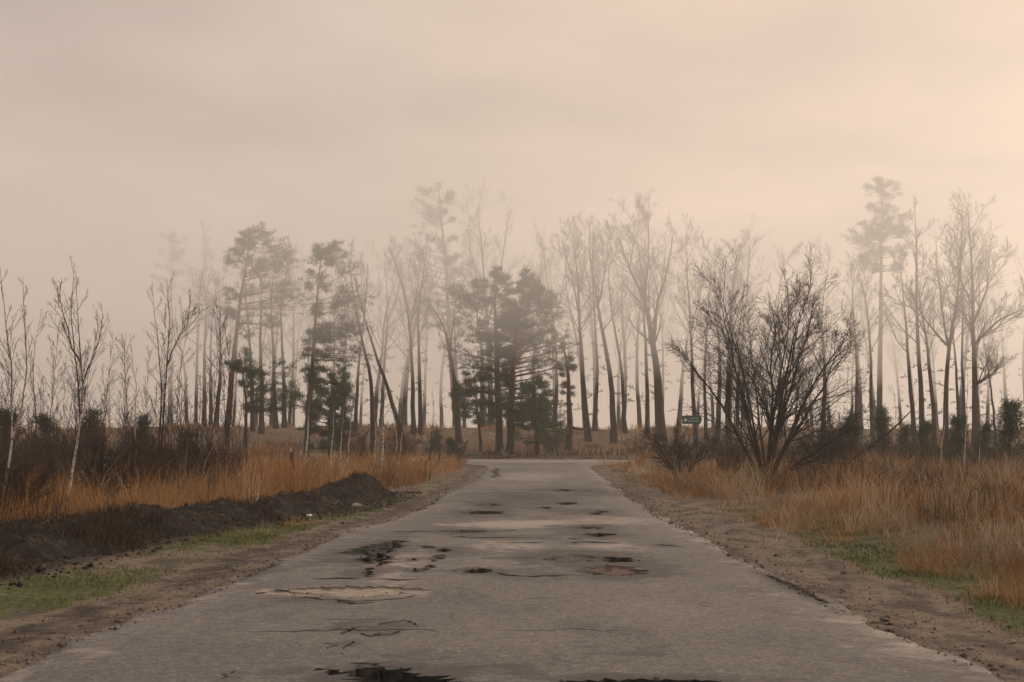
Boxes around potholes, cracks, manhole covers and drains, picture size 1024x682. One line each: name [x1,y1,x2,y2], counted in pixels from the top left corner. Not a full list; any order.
crack [255,530,566,655]
pothole [332,540,411,565]
pothole [580,564,650,576]
pothole [313,662,462,682]
